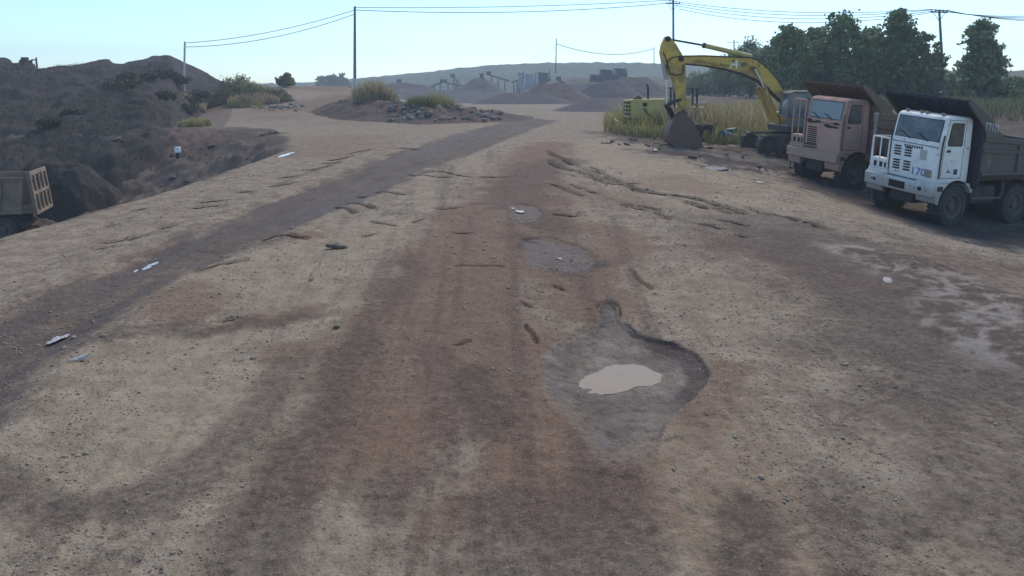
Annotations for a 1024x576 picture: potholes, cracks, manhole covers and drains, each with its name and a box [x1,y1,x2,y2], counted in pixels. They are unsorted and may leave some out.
pothole [534,300,710,480]
pothole [507,203,543,222]
pothole [518,236,598,273]
